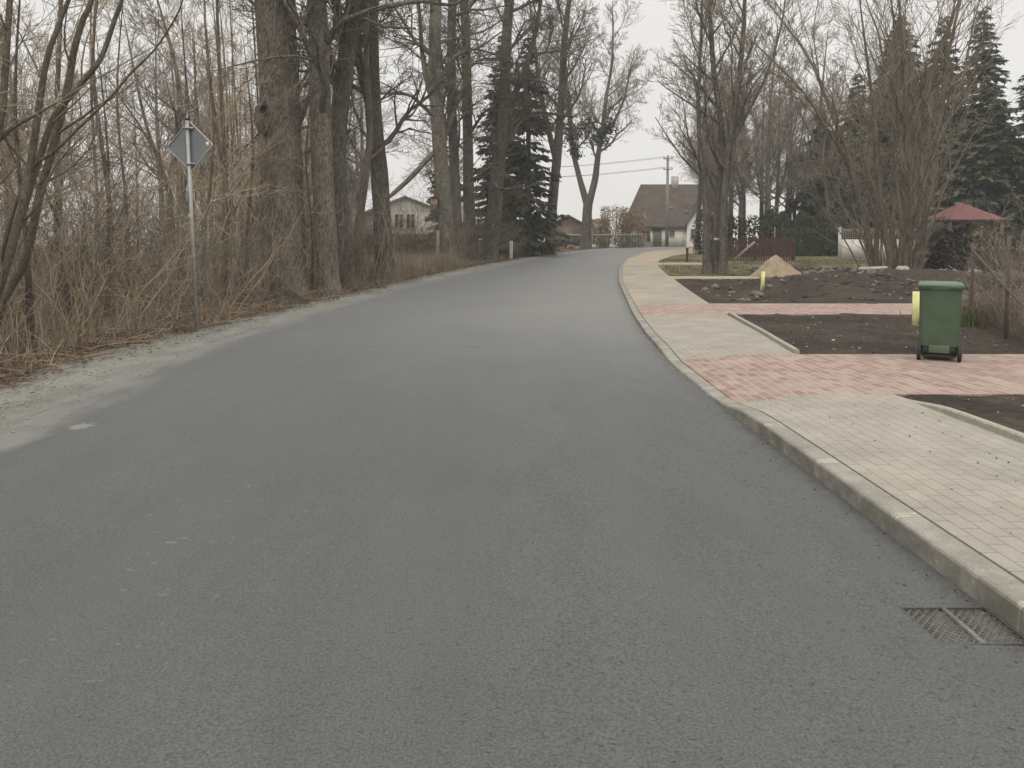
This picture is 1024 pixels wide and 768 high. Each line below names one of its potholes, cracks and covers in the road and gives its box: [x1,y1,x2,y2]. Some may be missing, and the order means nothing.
drain grate [898,606,1024,646]
